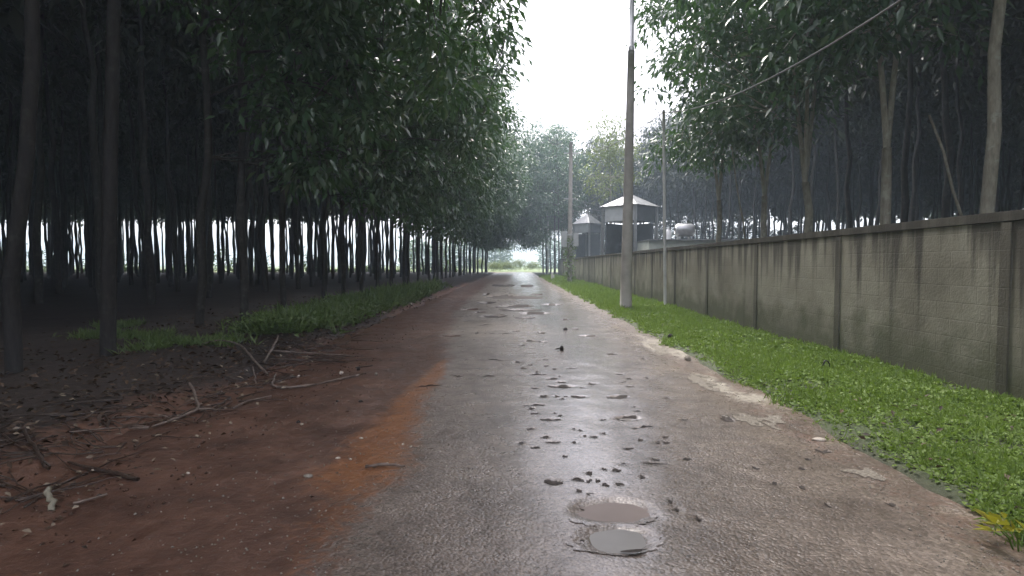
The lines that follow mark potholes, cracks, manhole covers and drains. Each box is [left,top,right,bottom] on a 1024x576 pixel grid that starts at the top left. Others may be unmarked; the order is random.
pothole [565,522,664,556]
pothole [568,492,658,530]
